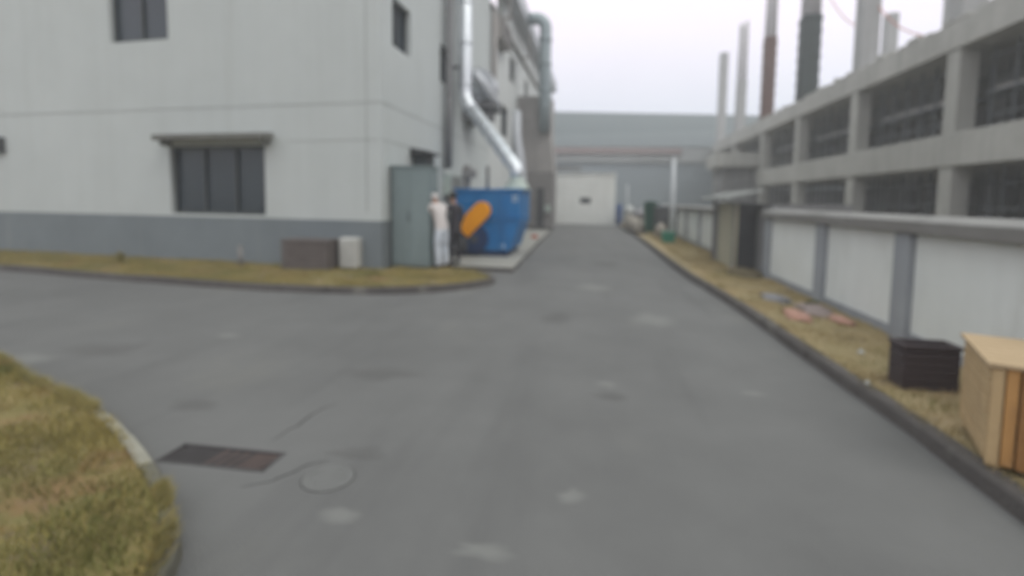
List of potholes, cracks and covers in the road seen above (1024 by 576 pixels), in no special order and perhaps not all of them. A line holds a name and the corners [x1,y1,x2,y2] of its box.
drain grate [154,443,286,473]
crack [241,460,329,487]
crack [271,403,336,442]
manhole cover [300,464,356,493]
